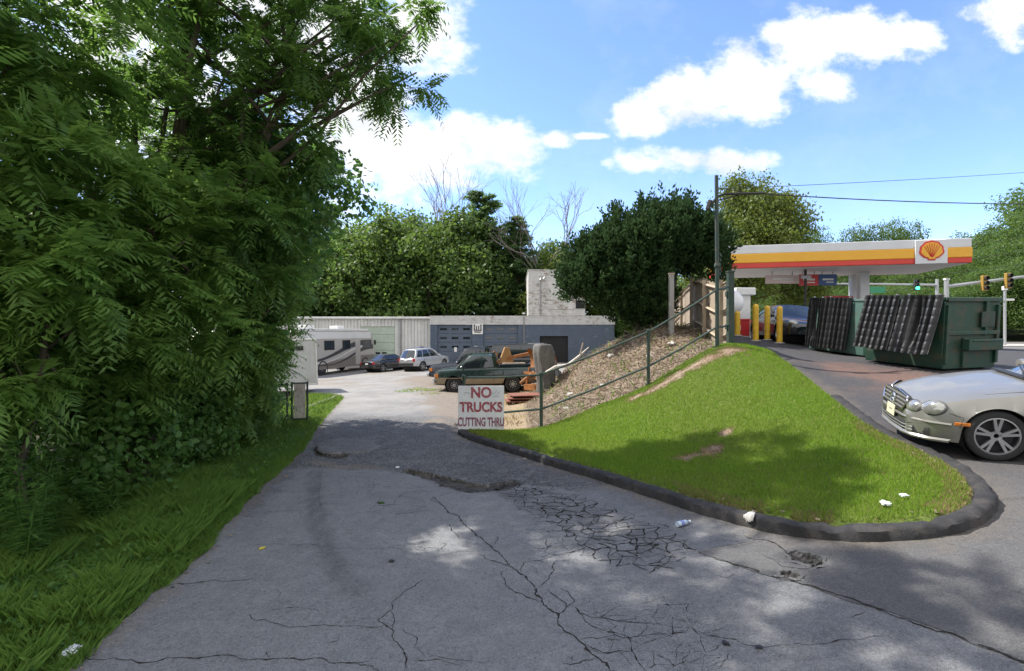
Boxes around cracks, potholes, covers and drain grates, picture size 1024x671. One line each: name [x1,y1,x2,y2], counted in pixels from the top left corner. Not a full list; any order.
crack [86,579,483,671]
pothole [397,468,524,494]
crack [256,471,871,671]
pothole [783,549,830,570]
pothole [775,568,805,581]
